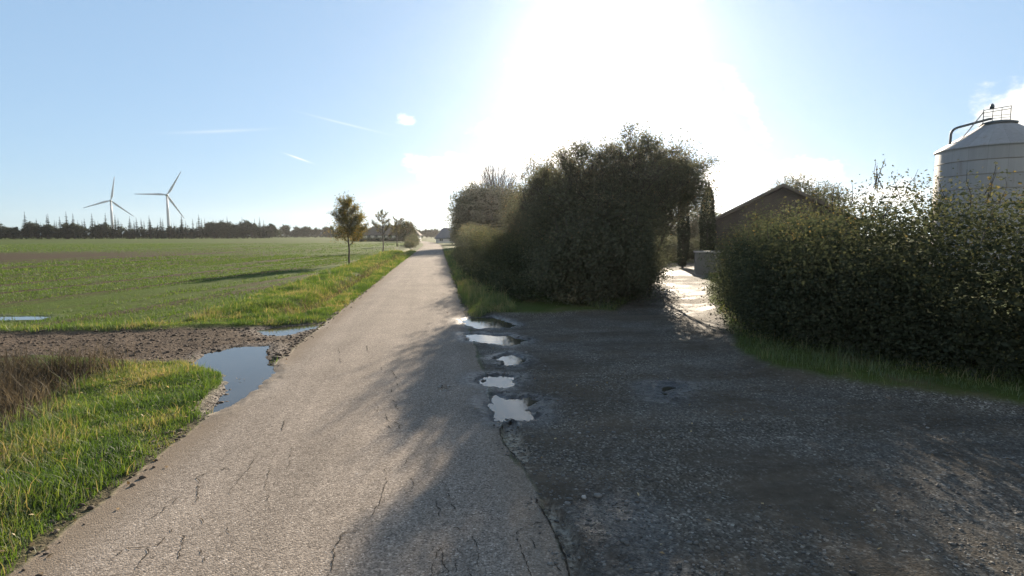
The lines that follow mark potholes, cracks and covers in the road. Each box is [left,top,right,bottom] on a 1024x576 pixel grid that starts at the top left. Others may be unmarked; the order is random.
crack [516,522,562,576]
crack [430,480,480,576]
pothole [493,351,530,366]
crack [327,469,387,576]
crack [114,421,292,569]
pothole [463,332,528,346]
pothole [475,373,519,388]
pothole [484,393,544,425]
